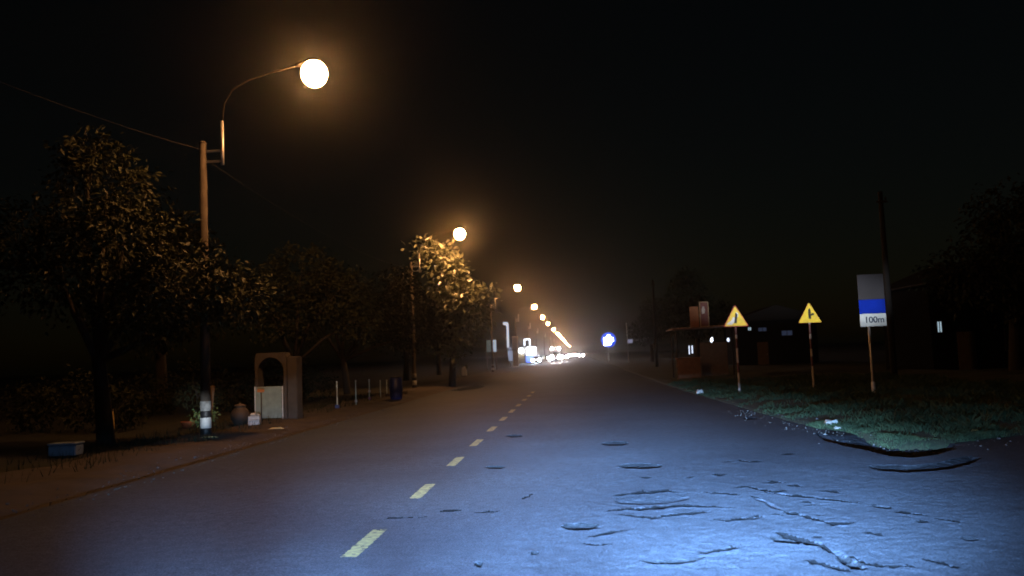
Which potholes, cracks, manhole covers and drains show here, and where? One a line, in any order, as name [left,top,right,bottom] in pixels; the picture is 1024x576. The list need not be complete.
pothole [816,430,958,458]
crack [583,460,961,572]
pothole [869,456,981,473]
pothole [561,522,599,530]
